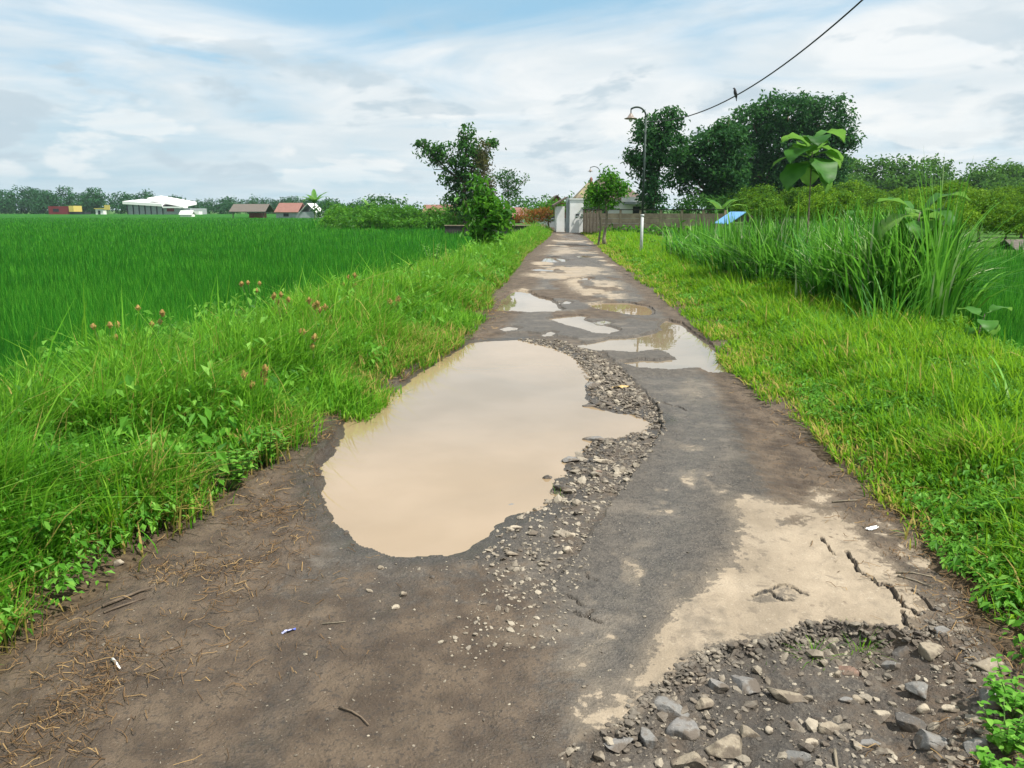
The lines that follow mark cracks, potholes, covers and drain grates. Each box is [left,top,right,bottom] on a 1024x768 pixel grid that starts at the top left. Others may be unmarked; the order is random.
pothole [558,615,999,768]
crack [820,536,936,631]
pothole [588,301,655,315]
pothole [492,289,567,312]
pothole [575,318,731,373]
pothole [545,314,622,334]
crack [568,595,603,624]
pothole [313,330,663,592]
